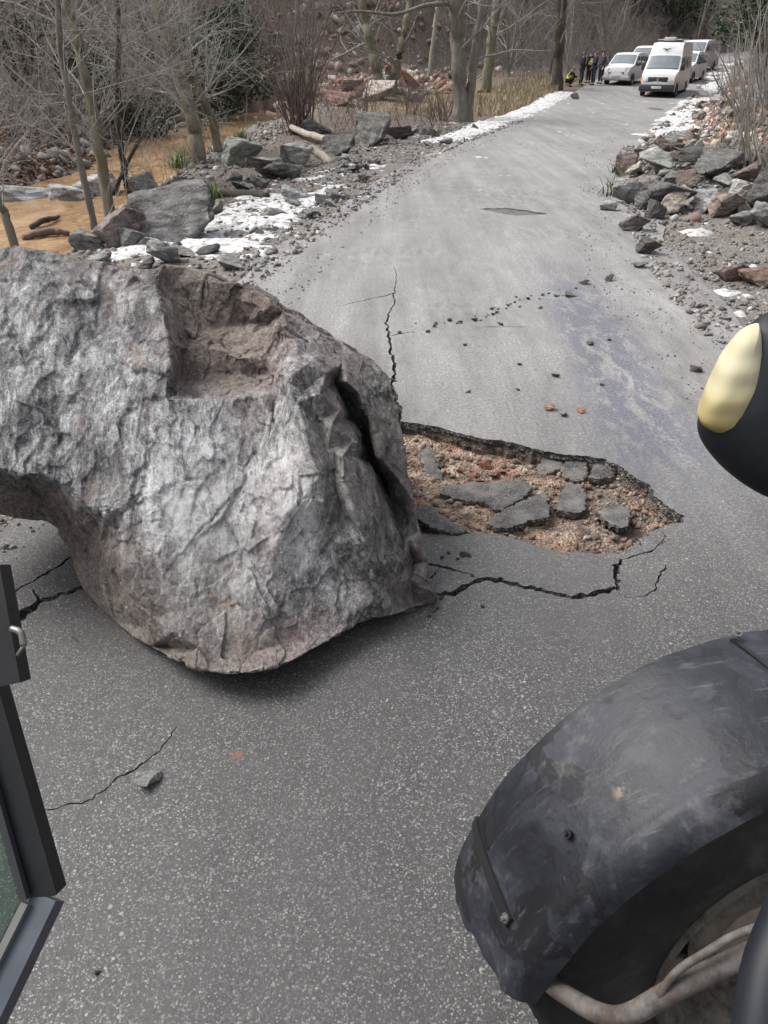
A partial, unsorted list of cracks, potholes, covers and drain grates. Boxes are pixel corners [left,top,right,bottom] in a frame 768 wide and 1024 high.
pothole [399,421,684,554]
crack [45,726,177,810]
crack [429,530,670,599]
crack [15,556,84,644]
crack [341,270,413,426]
